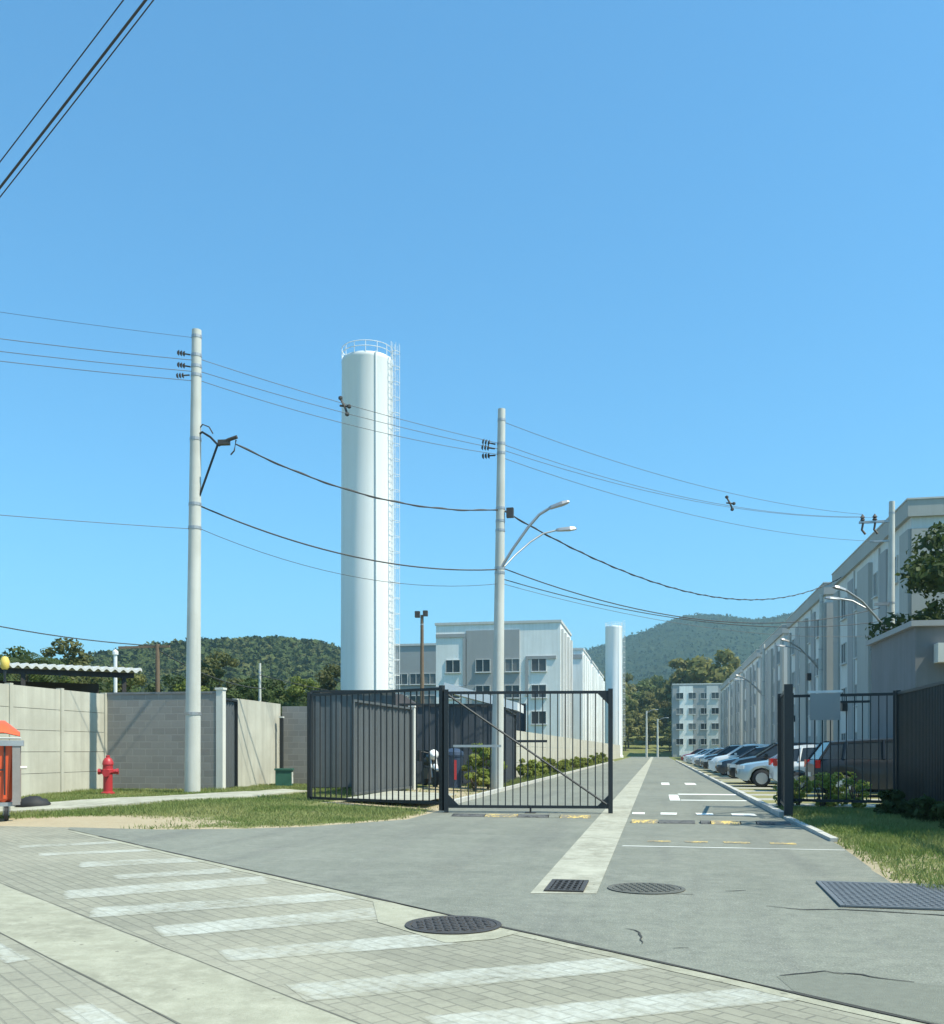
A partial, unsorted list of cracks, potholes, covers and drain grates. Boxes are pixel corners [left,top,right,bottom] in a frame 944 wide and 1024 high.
crack [783,970,914,982]
drain grate [544,879,589,892]
manhole cover [608,882,686,894]
drain grate [816,881,944,910]
manhole cover [405,915,502,934]
